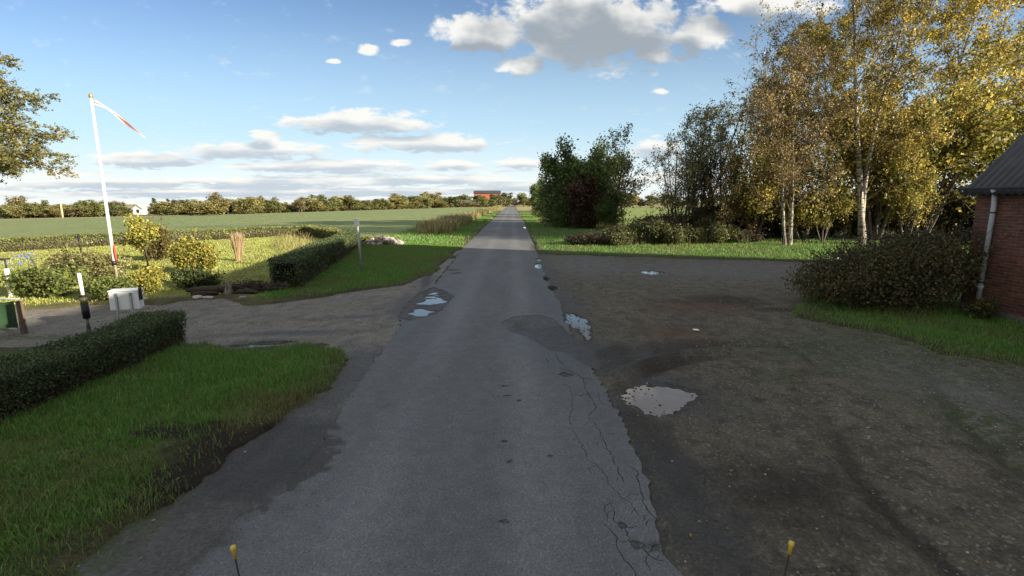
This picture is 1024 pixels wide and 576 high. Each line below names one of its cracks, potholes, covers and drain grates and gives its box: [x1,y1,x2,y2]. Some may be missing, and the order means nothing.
crack [546,356,664,576]
pothole [620,381,710,418]
pothole [397,287,454,321]
